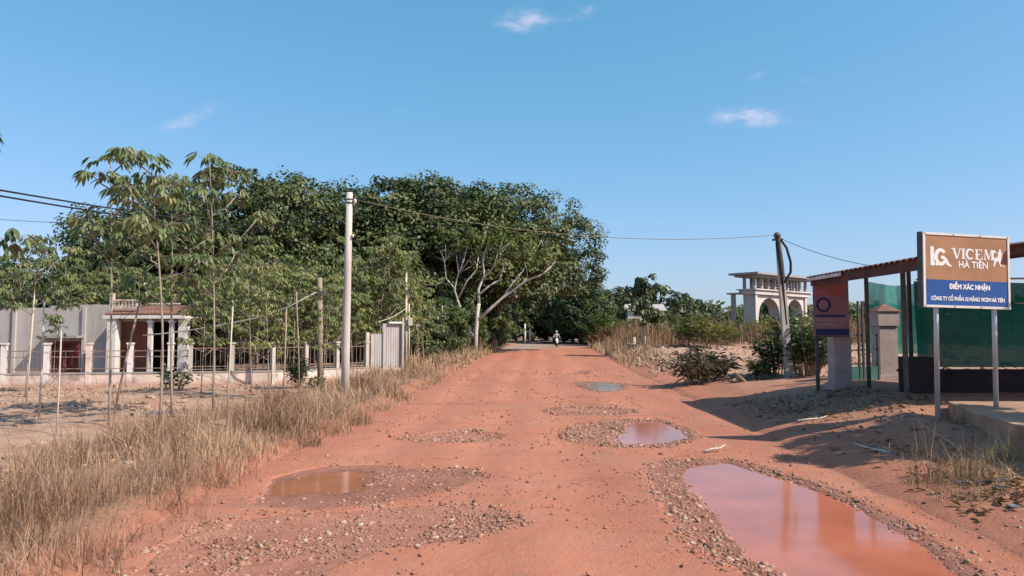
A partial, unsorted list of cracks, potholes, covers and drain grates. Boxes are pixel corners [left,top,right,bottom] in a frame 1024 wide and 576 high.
pothole [632,454,998,576]
pothole [242,462,492,513]
pothole [540,405,639,416]
pothole [569,381,631,392]
pothole [556,418,707,449]
pothole [388,428,510,444]
